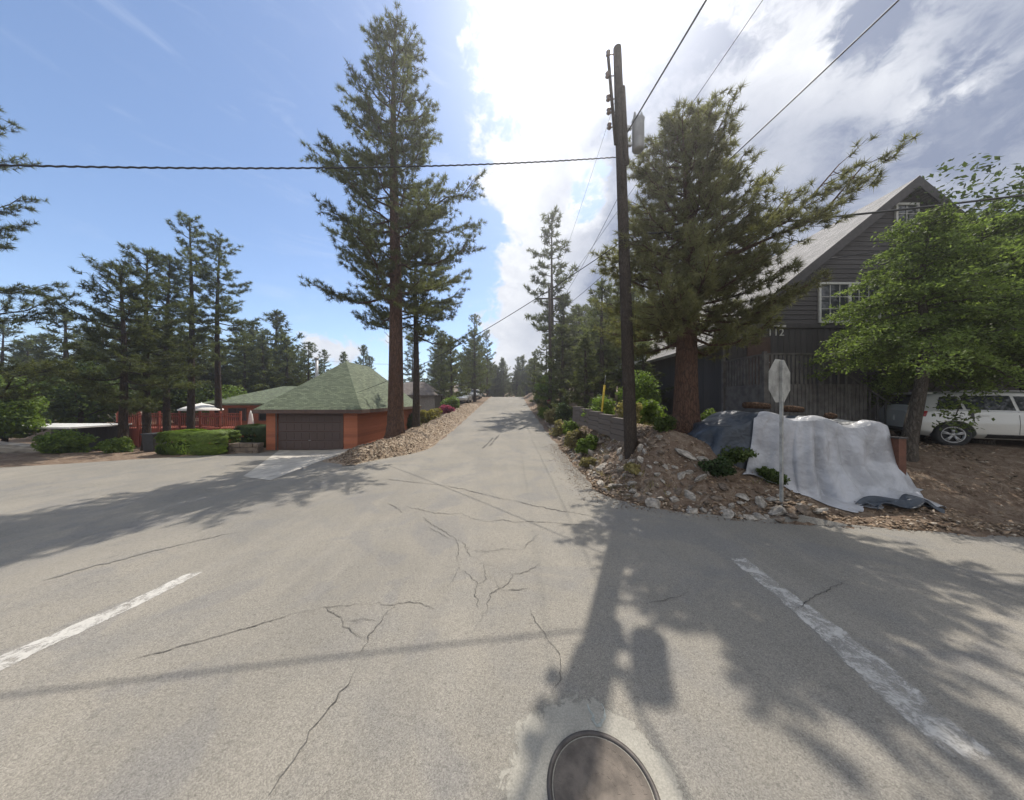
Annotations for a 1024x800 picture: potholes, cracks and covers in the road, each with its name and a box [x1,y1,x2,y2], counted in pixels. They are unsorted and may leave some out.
crack [390,479,585,624]
manhole cover [492,691,692,800]
crack [129,601,432,662]
